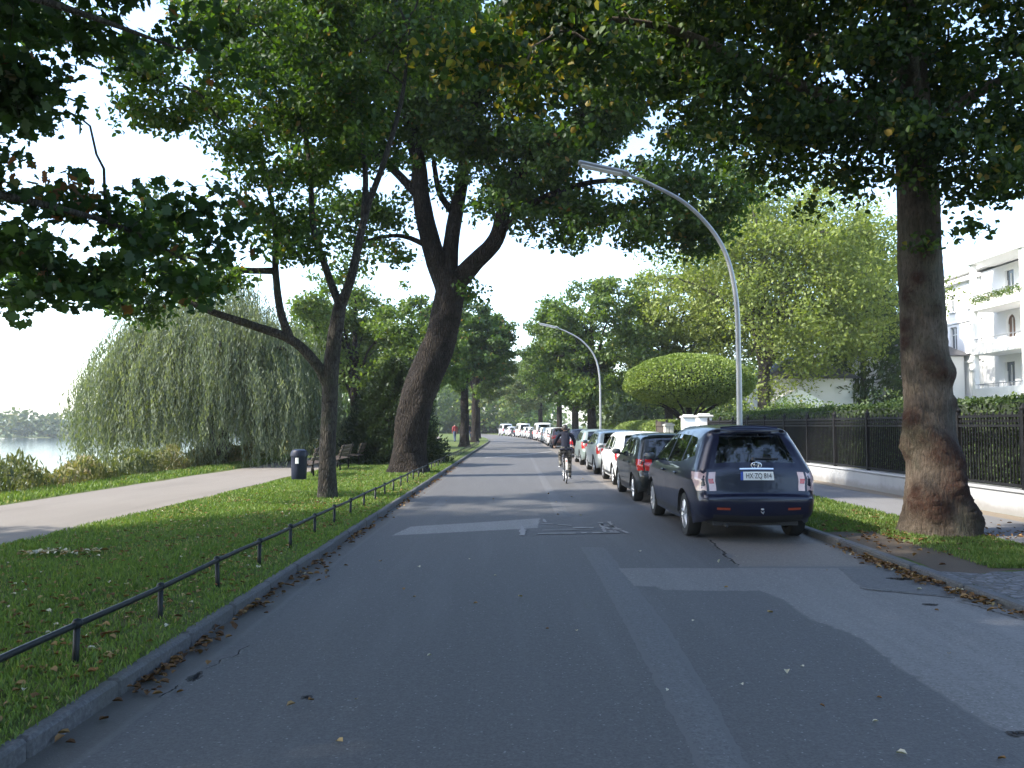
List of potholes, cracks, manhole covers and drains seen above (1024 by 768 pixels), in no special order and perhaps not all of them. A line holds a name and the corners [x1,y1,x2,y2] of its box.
crack [206,644,257,669]
crack [706,539,739,565]
pothole [185,671,204,682]
crack [159,684,183,697]
